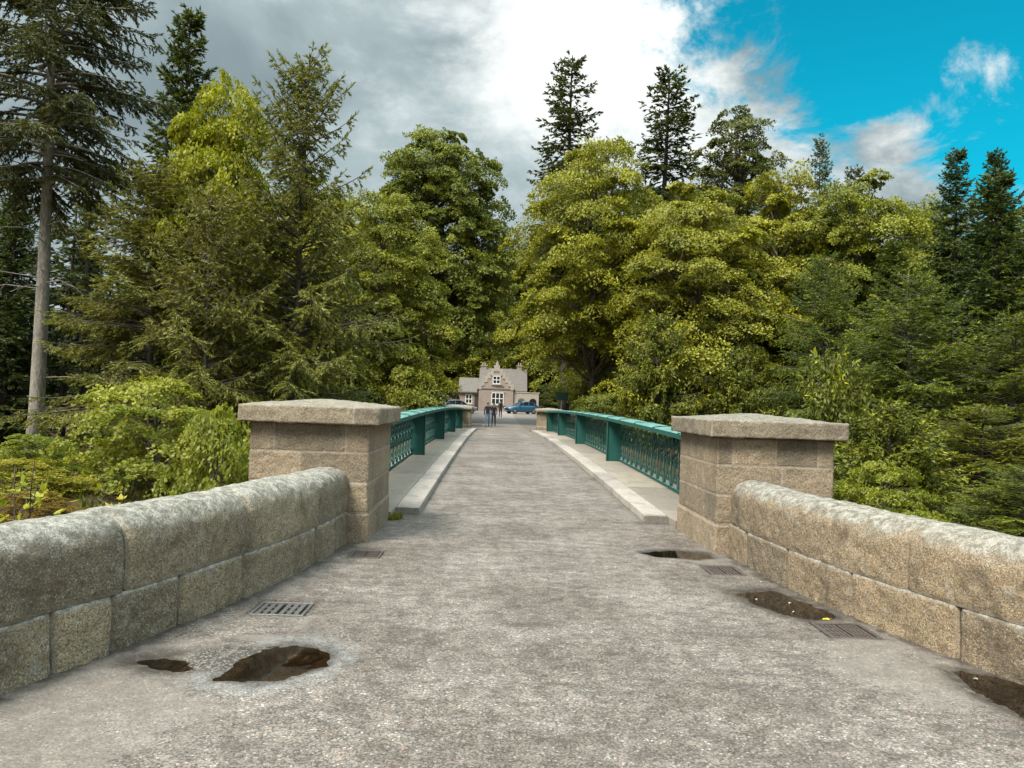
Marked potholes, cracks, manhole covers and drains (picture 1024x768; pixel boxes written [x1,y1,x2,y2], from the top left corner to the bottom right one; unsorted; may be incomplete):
pothole [212,646,330,682]
pothole [642,551,714,560]
pothole [953,671,1024,719]
drain grate [810,622,883,639]
pothole [735,590,836,626]
drain grate [248,601,315,616]
pothole [136,658,194,672]
drain grate [701,565,746,576]
drain grate [348,550,384,558]
